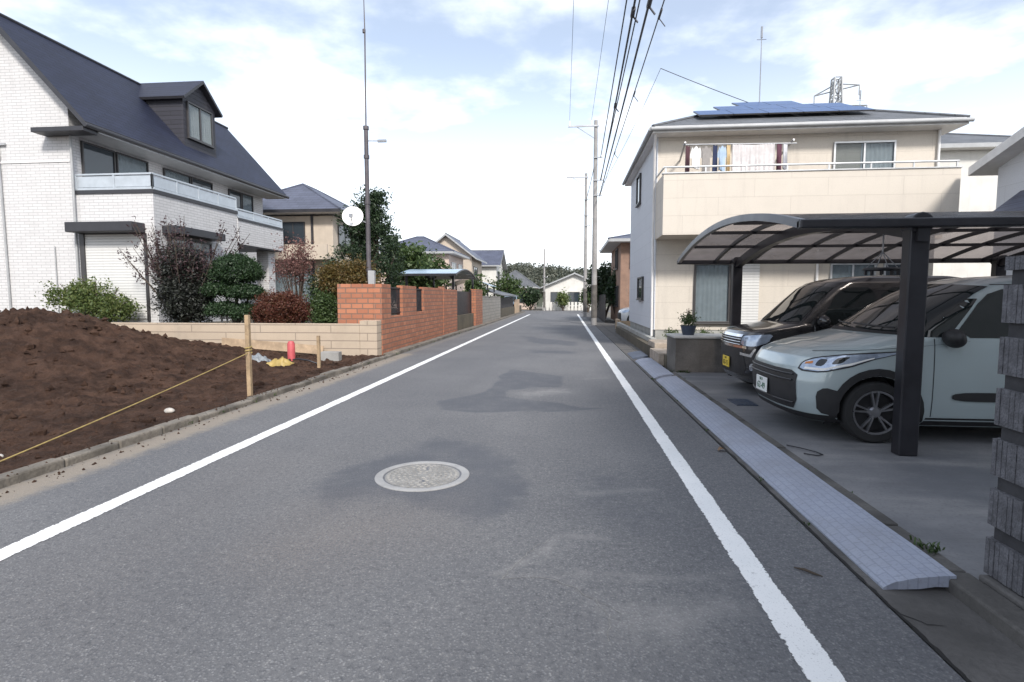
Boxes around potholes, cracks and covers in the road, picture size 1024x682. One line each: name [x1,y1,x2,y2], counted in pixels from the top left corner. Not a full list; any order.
manhole cover [375,461,469,492]
